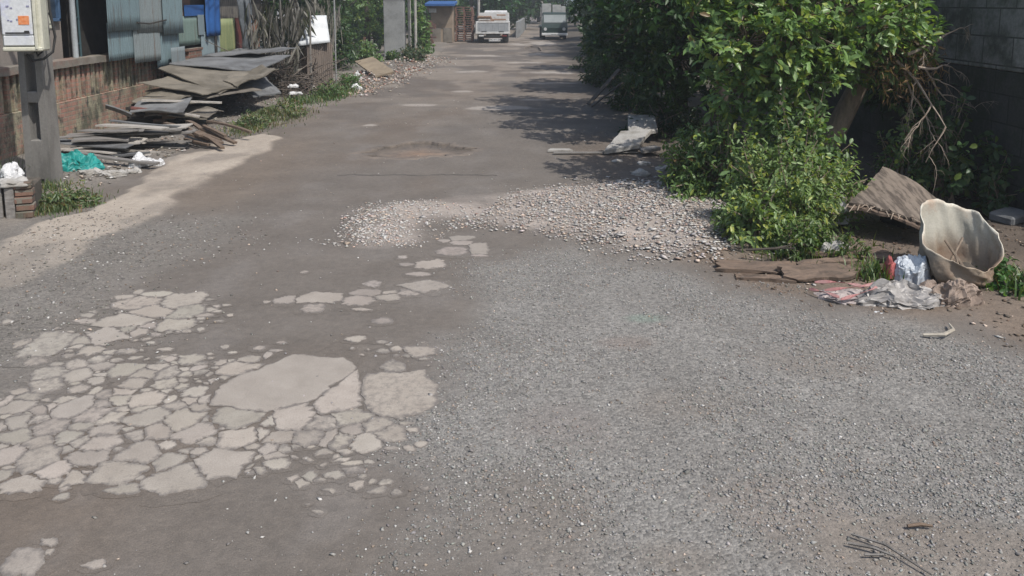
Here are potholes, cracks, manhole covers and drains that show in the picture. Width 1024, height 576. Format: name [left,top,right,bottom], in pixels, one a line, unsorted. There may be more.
crack [0,234,498,518]
pothole [348,140,487,160]
